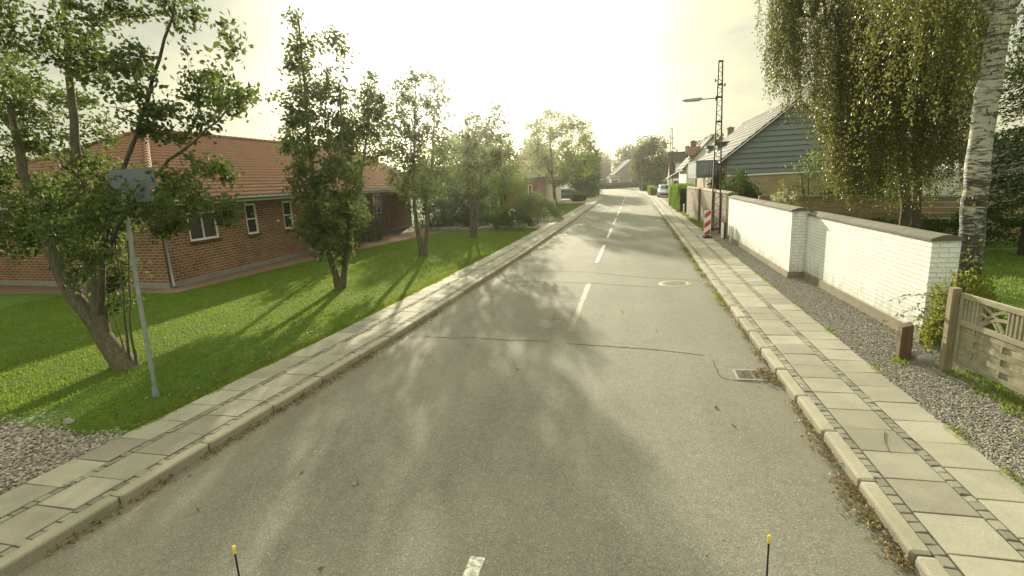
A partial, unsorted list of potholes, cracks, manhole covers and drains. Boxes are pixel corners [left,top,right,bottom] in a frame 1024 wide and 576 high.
crack [570,343,759,383]
drain grate [732,369,774,382]
